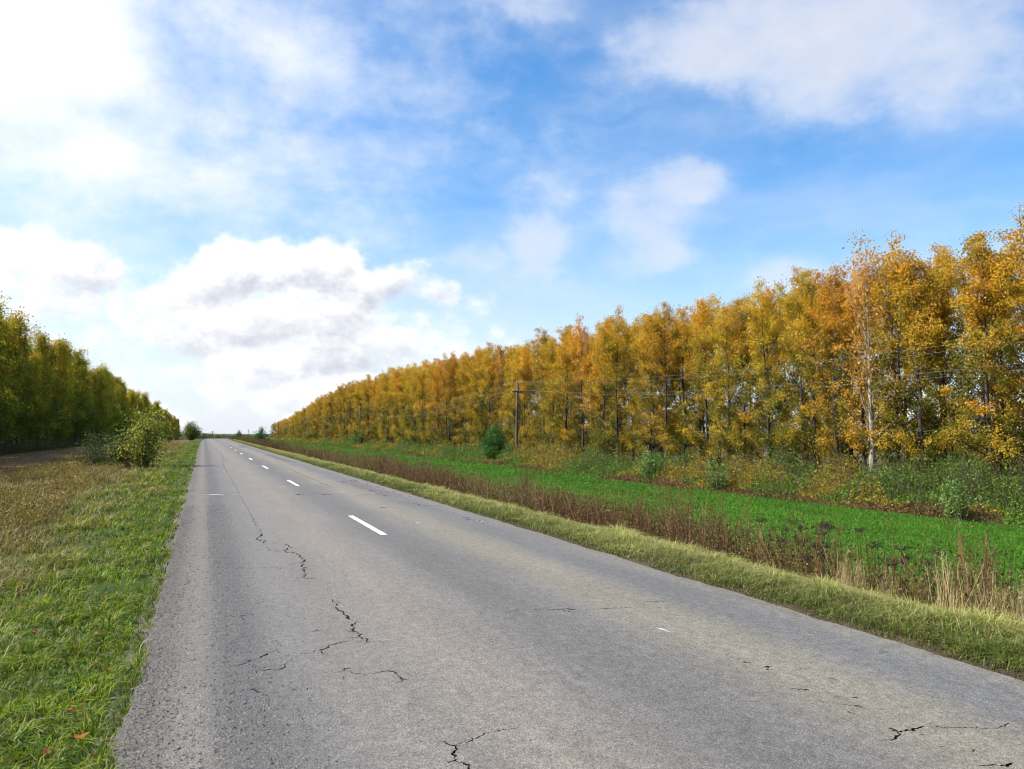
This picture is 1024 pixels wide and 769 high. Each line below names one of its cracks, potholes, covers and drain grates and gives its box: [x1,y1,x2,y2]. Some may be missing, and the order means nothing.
crack [504,601,694,616]
crack [220,453,312,579]
crack [221,597,407,682]
crack [440,727,525,769]
crack [878,723,1009,747]
